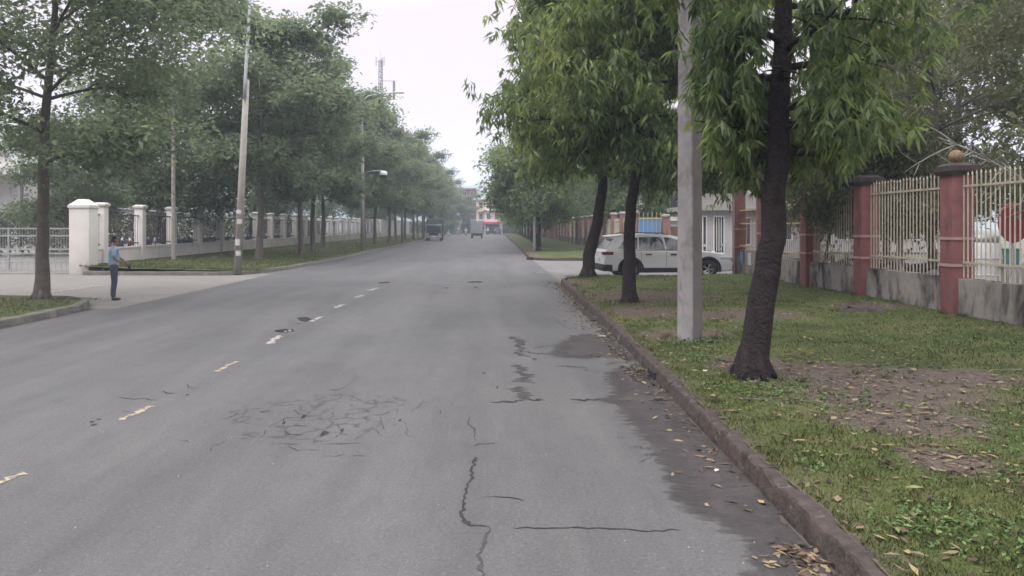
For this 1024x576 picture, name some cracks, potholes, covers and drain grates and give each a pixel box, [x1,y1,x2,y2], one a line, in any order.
crack [224,383,441,456]
crack [496,346,549,403]
crack [459,418,522,576]
